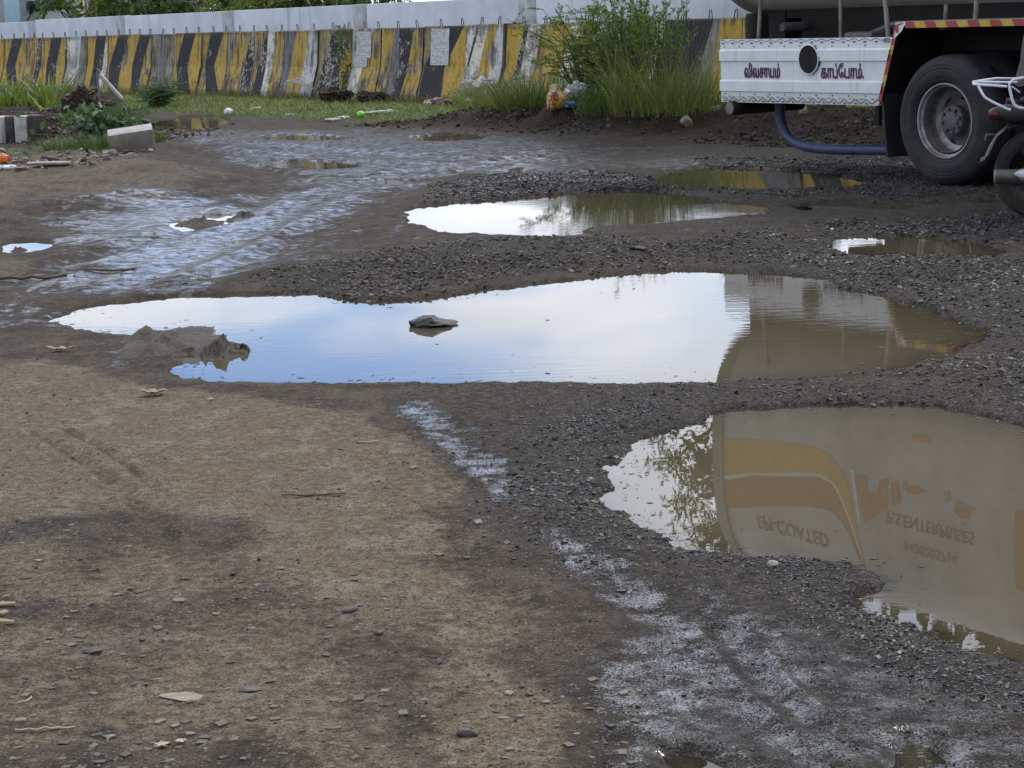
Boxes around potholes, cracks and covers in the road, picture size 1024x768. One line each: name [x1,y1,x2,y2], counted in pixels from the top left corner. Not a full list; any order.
pothole [37,266,1012,385]
pothole [640,164,880,189]
pothole [812,231,1024,255]
pothole [269,159,362,171]
pothole [0,237,59,253]
pothole [392,186,812,236]
pothole [573,396,1024,666]
